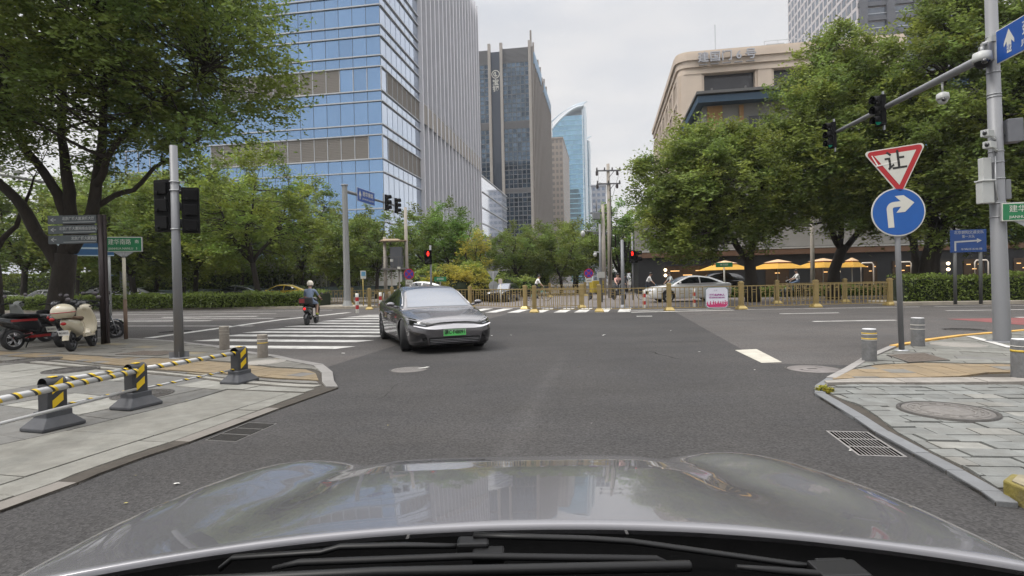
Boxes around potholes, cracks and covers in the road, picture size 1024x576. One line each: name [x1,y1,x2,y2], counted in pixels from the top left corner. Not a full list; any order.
manhole cover [784,365,841,373]
manhole cover [887,353,950,363]
manhole cover [896,401,1003,424]
drain grate [826,430,908,457]
drain grate [205,422,277,442]
